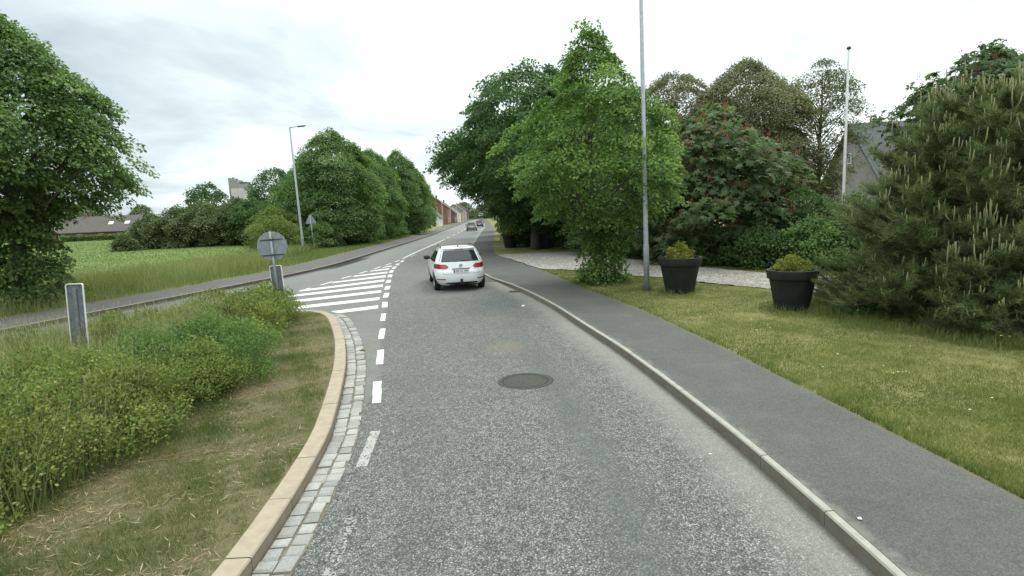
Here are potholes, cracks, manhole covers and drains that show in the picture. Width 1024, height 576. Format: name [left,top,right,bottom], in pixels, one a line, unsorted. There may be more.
manhole cover [498,373,554,389]
